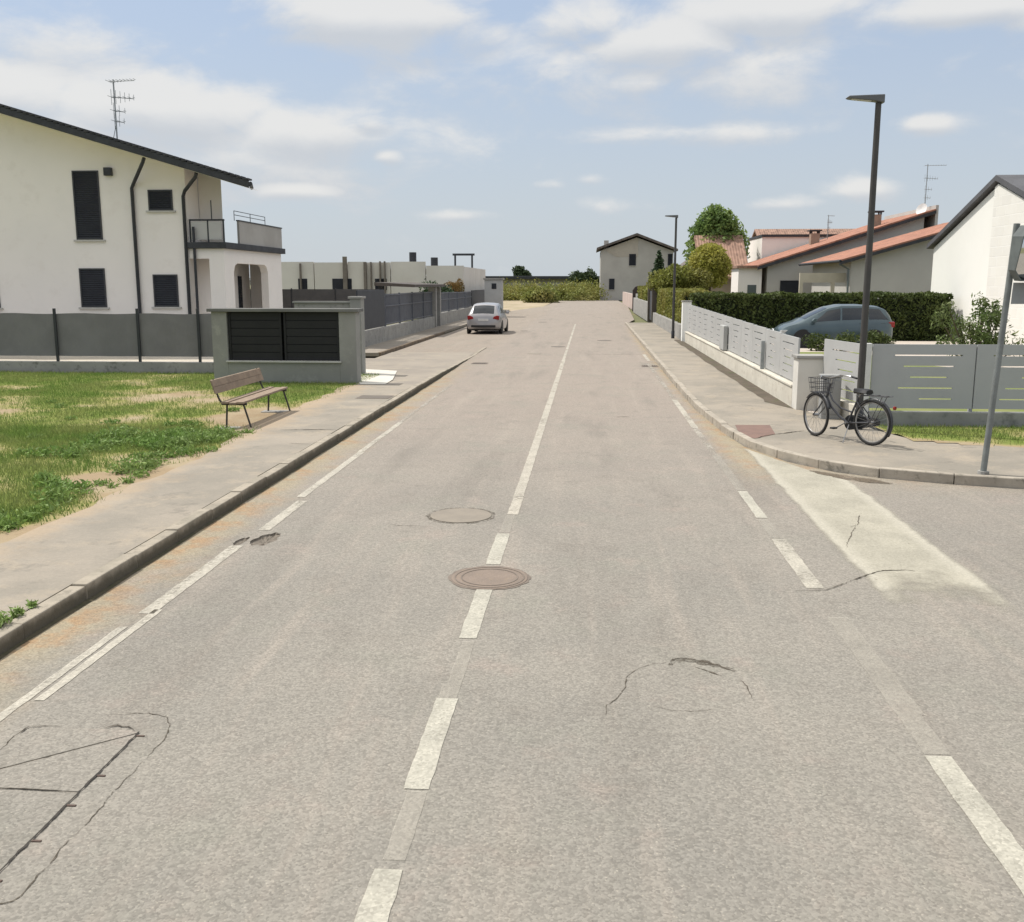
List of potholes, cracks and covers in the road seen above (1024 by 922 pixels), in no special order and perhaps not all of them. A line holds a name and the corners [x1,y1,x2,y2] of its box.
manhole cover [448,566,531,590]
manhole cover [426,508,494,524]
pothole [249,532,281,546]
